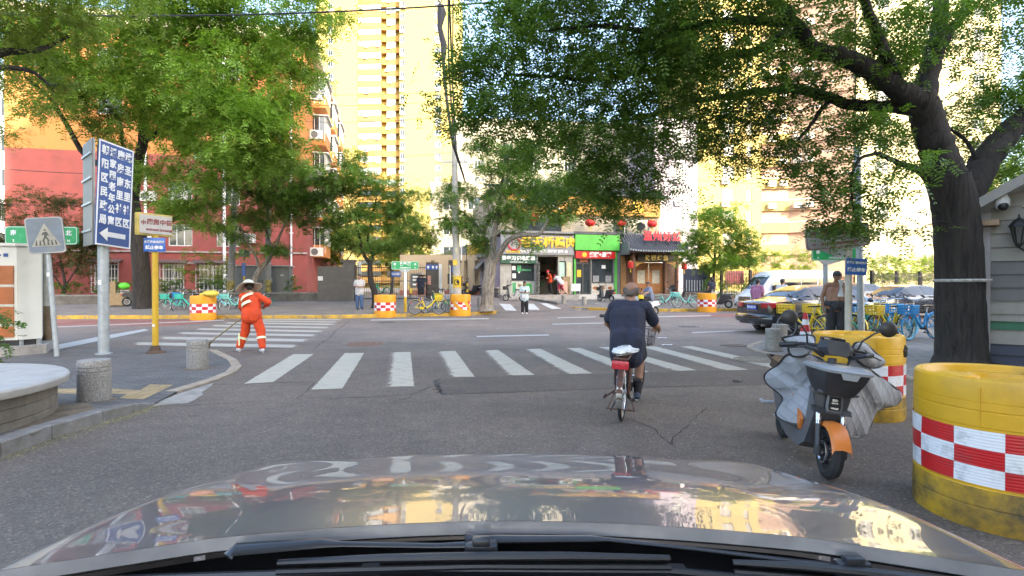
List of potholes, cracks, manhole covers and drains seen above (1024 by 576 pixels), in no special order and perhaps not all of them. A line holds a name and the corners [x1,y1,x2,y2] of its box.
crack [628,407,707,446]
